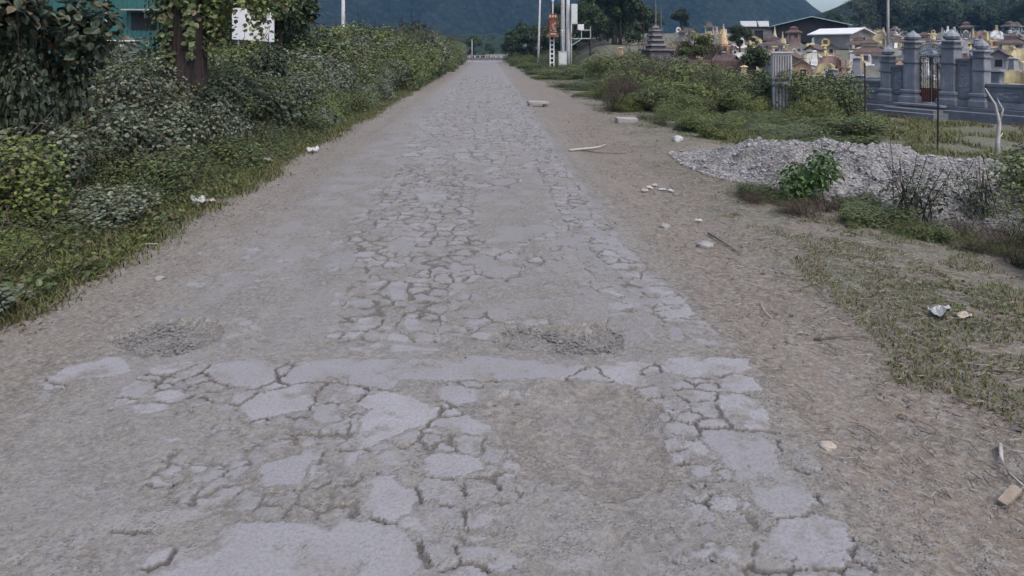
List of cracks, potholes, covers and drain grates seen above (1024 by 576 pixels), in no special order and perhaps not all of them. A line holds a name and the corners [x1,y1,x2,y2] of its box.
crack [565,364,877,576]
pothole [102,317,229,359]
crack [329,75,707,343]
pothole [466,321,626,355]
crack [38,362,522,574]
